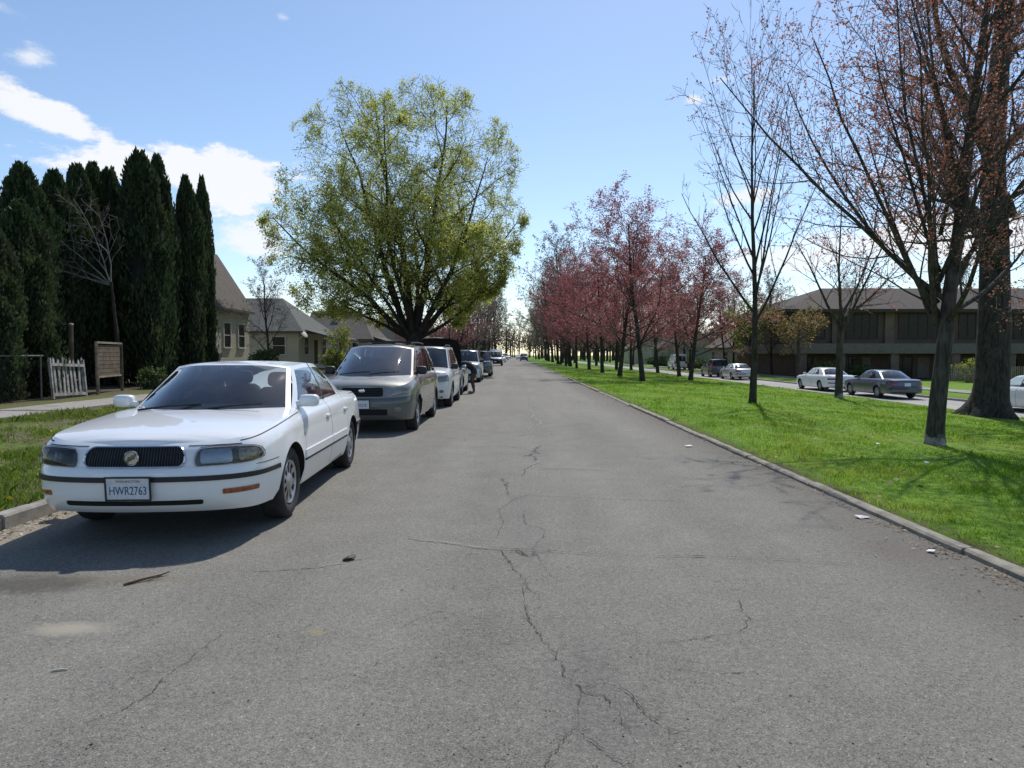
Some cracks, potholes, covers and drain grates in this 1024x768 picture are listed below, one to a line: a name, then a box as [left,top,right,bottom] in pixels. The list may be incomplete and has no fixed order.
crack [412,392,876,768]
crack [83,629,231,724]
